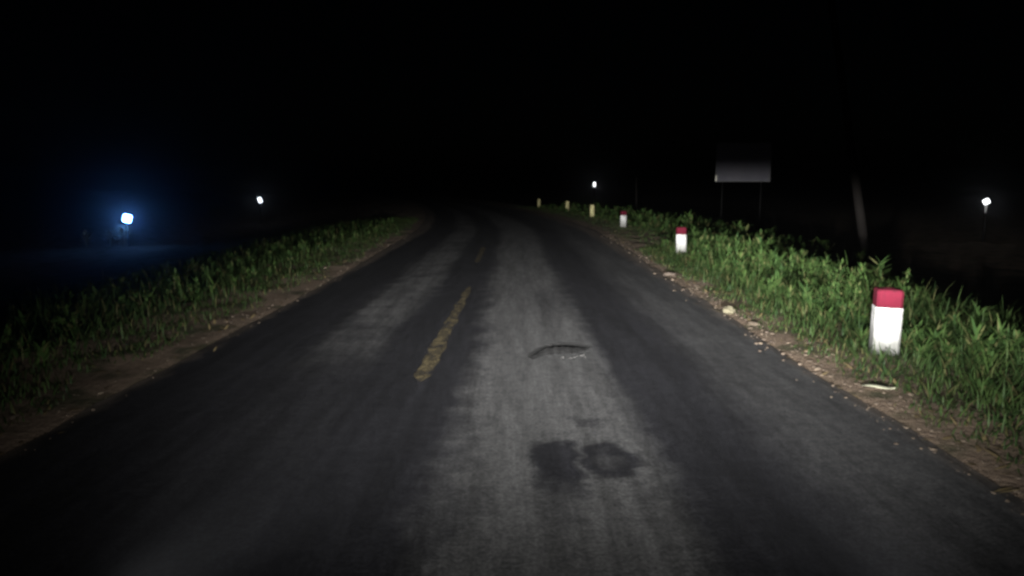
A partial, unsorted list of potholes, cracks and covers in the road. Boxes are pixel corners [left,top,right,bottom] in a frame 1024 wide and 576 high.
pothole [527,342,592,360]
